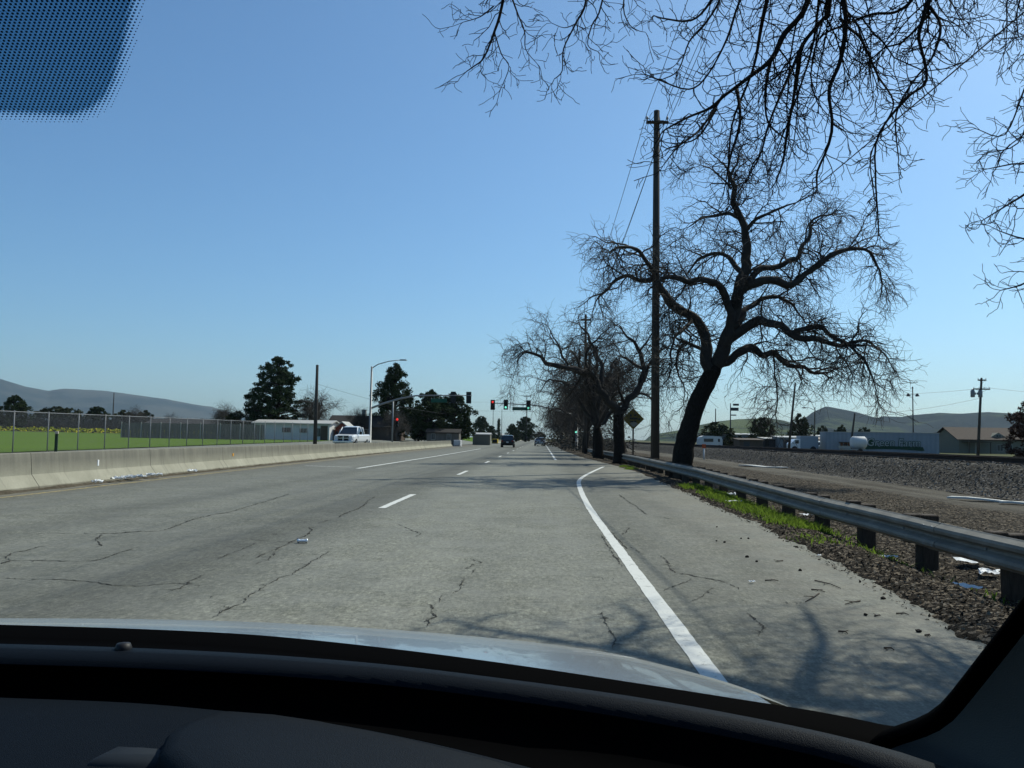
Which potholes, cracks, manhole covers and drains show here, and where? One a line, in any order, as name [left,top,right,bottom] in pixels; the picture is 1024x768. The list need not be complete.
crack [660,556,744,601]
crack [2,494,422,617]
crack [747,600,852,636]
crack [424,558,482,626]
crack [591,495,669,580]
